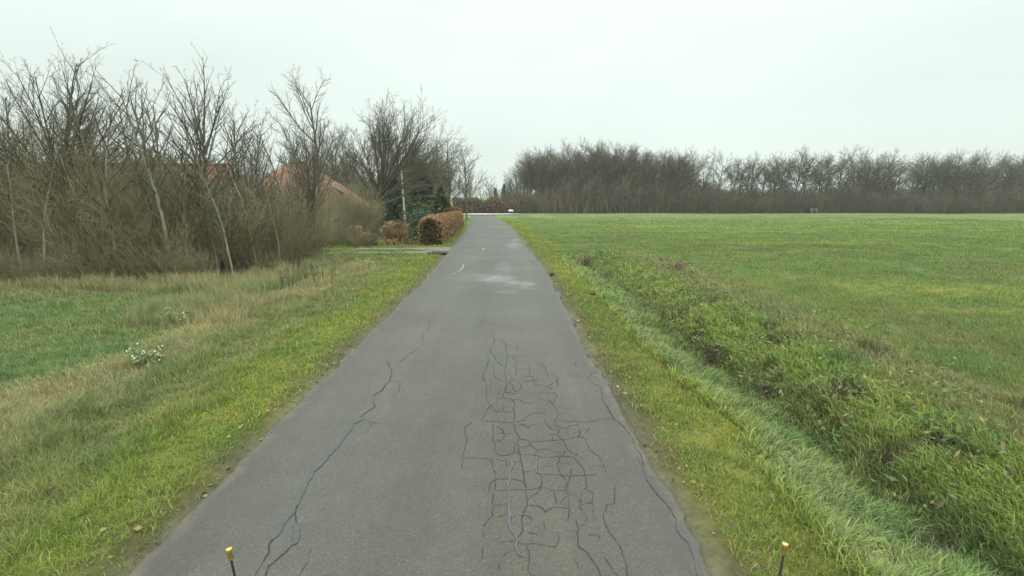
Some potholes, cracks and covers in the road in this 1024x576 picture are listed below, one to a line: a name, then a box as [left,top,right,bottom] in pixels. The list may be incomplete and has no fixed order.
crack [569,361,702,576]
crack [478,309,628,576]
